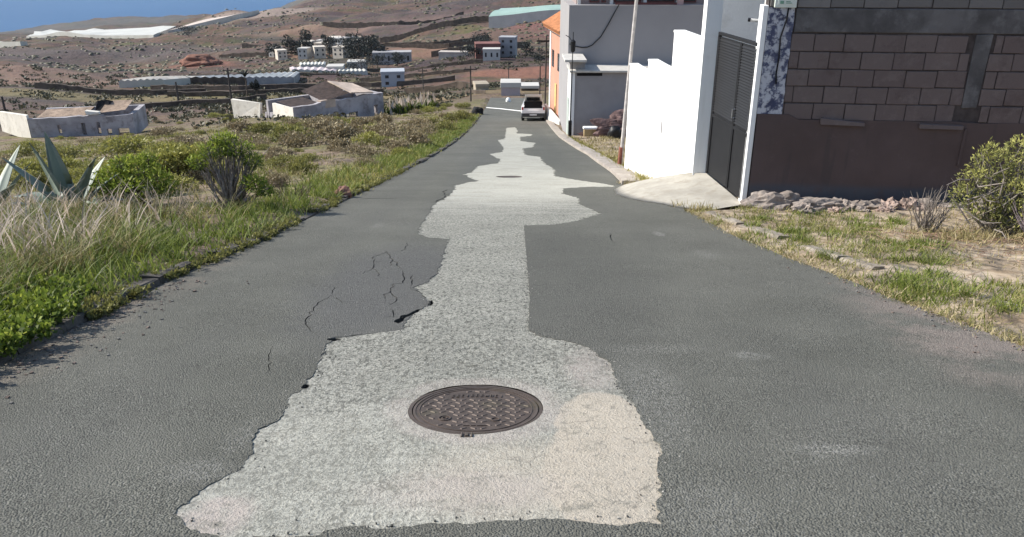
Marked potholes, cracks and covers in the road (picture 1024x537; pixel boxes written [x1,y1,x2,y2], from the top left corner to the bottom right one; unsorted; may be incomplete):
crack [305,287,345,335]
crack [366,242,426,318]
manhole cover [408,385,543,437]
